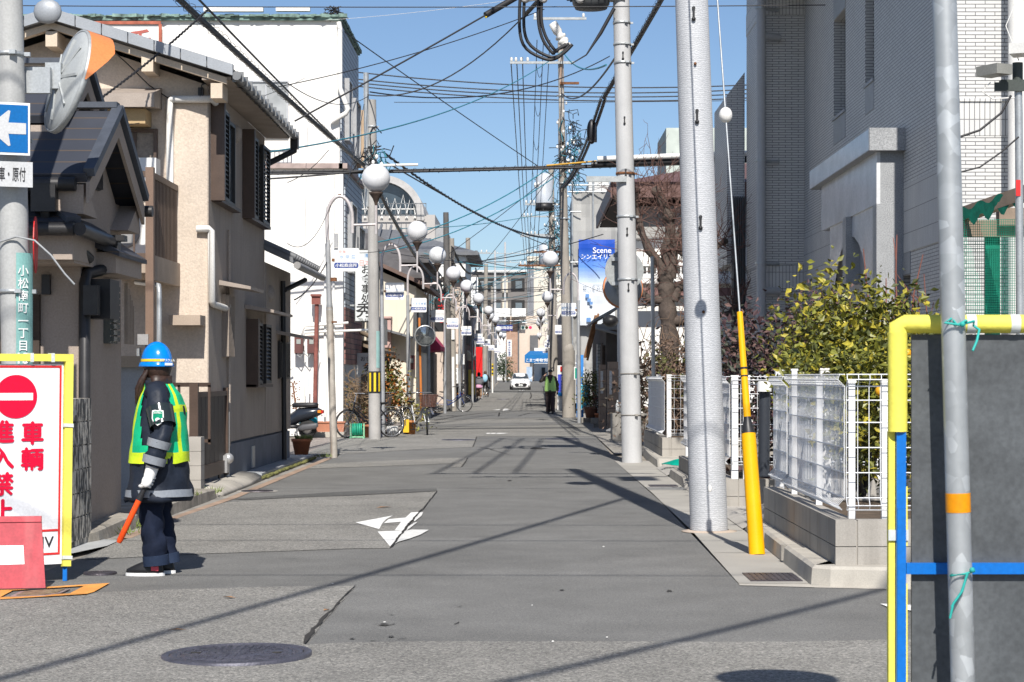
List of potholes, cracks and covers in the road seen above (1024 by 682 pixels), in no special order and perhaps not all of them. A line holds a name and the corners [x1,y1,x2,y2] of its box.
manhole cover [161,643,312,666]
drain grate [742,573,803,581]
